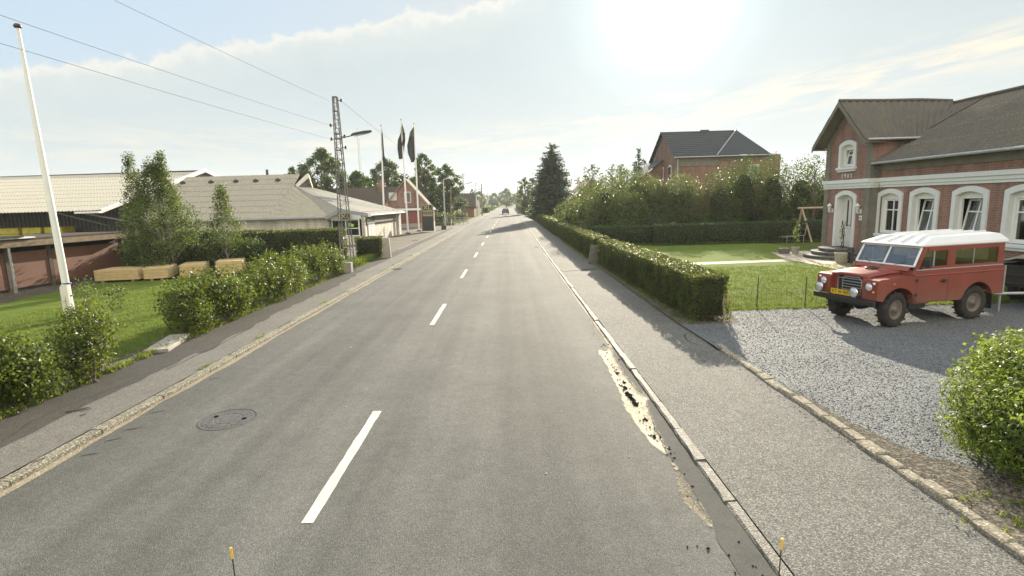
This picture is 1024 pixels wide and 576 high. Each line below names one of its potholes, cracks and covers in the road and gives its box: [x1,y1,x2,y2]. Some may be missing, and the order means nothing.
pothole [598,348,665,453]
manhole cover [196,408,259,431]
